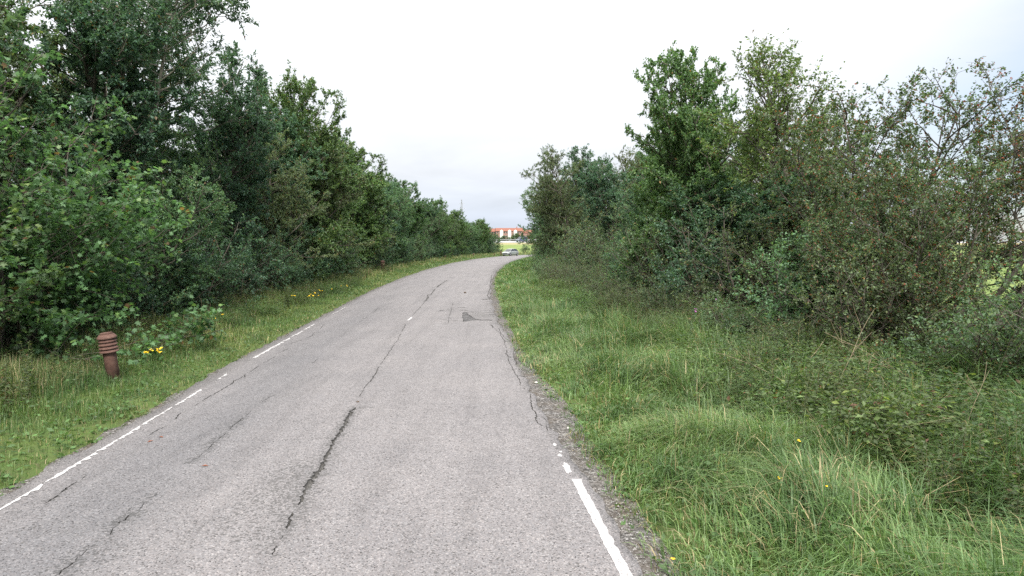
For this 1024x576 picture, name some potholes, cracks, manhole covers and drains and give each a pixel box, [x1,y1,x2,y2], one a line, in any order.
crack [59,309,377,575]
crack [491,325,548,436]
crack [272,277,465,555]
